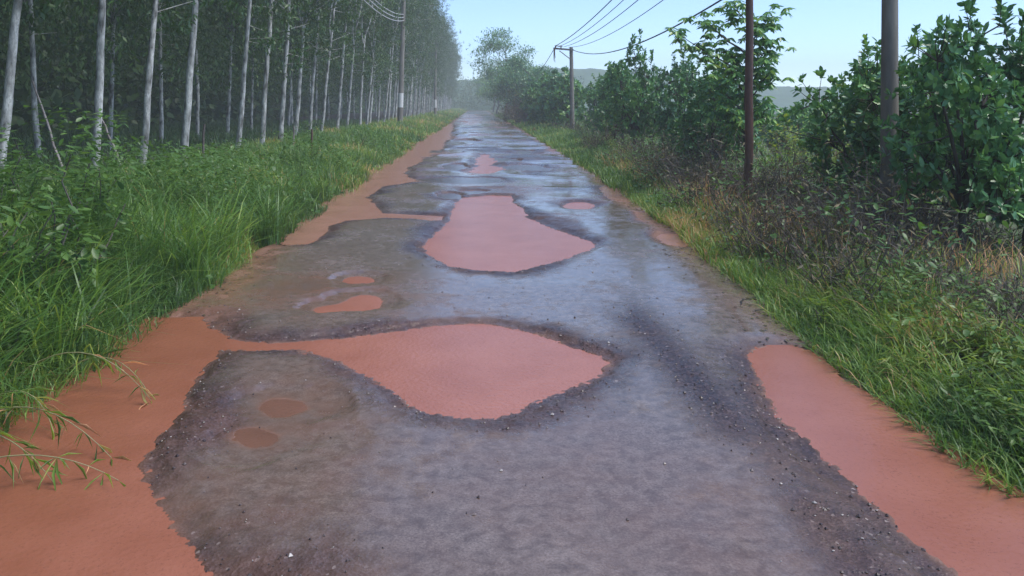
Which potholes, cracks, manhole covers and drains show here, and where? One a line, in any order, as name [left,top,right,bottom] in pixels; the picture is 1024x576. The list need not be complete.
pothole [324,271,393,285]
pothole [198,415,313,464]
pothole [464,153,509,174]
pothole [412,192,607,273]
pothole [293,288,404,314]
pothole [224,387,339,424]
pothole [261,315,634,424]
